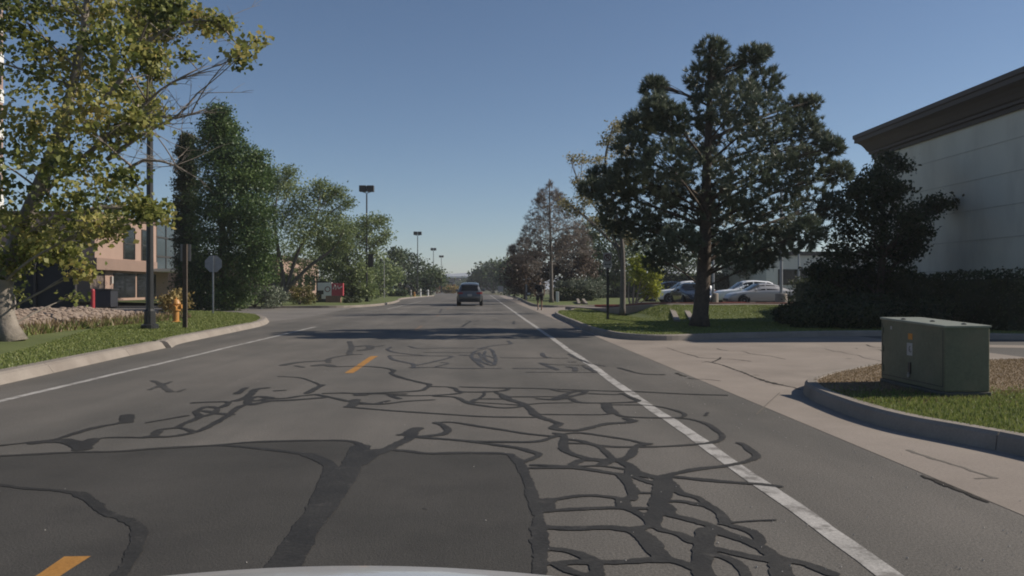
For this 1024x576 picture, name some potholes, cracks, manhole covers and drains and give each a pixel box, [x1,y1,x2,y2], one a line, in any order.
crack [669,348,801,390]
crack [907,450,999,502]
